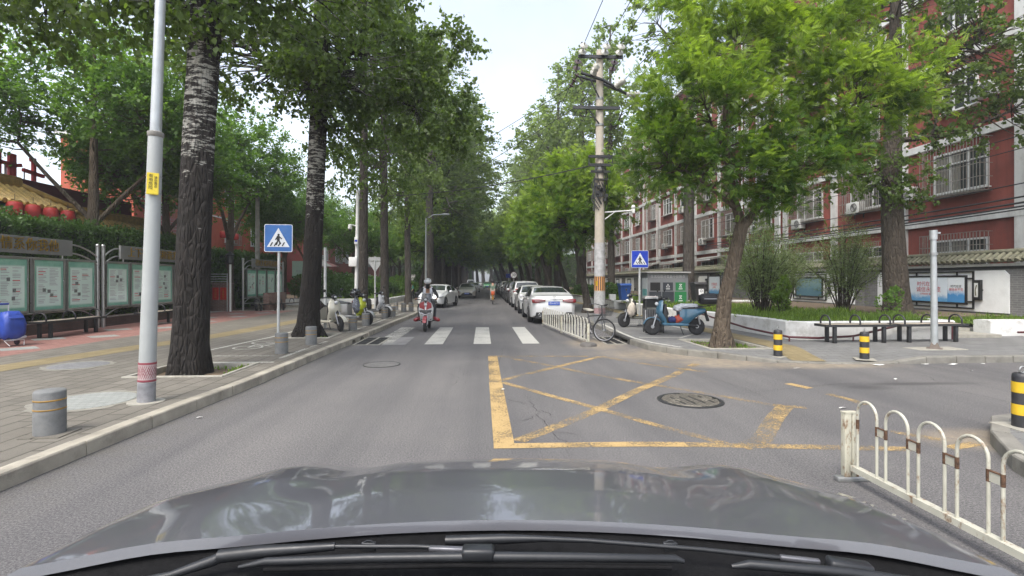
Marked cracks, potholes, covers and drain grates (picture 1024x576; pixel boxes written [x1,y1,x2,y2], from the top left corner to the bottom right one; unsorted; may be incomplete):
manhole cover [657,393,725,409]
drain grate [353,337,392,345]
